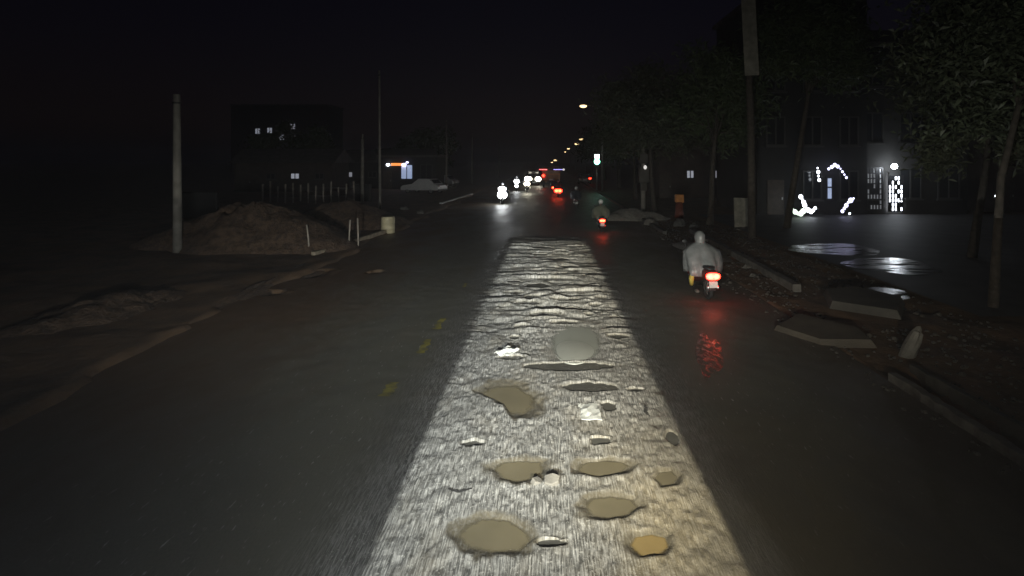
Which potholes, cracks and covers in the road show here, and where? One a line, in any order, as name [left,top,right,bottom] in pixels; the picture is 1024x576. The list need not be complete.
pothole [621,527,676,558]
pothole [537,537,570,546]
pothole [459,438,487,446]
pothole [472,376,559,422]
pothole [532,316,616,376]
pothole [511,361,629,372]
pothole [480,454,556,487]
pothole [555,379,627,392]
pothole [567,455,641,478]
pothole [443,509,543,561]
pothole [572,489,648,522]
pothole [652,467,684,488]
